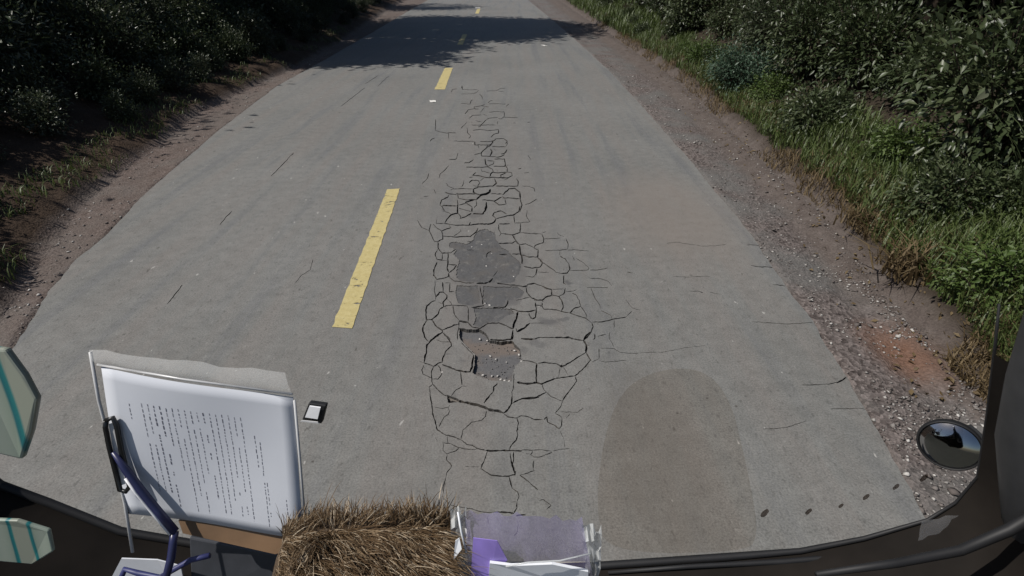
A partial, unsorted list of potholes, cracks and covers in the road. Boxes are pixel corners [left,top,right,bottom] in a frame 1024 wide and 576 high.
pothole [459,328,522,381]
